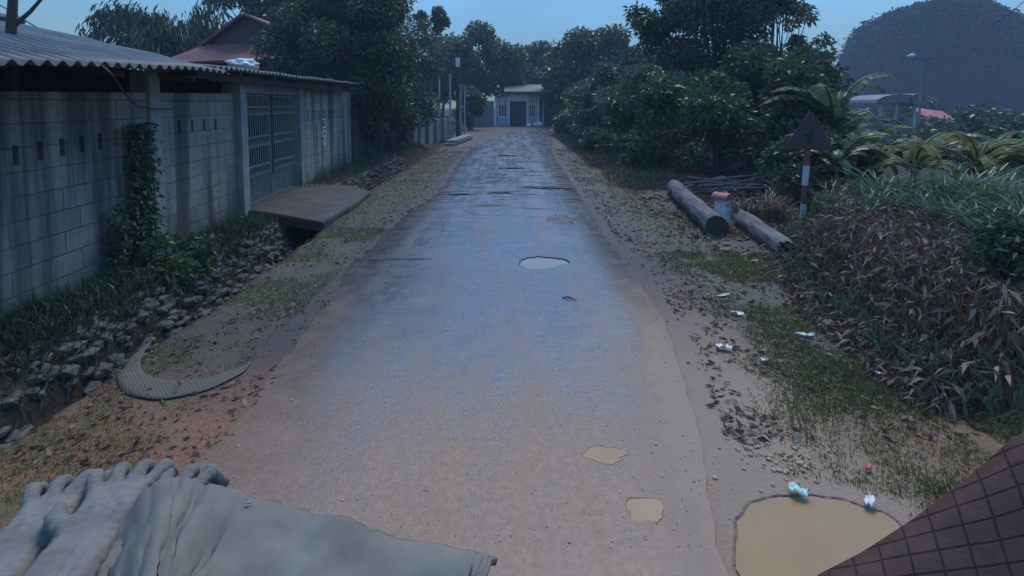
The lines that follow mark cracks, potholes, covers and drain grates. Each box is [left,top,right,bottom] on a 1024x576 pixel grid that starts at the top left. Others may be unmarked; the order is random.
pothole [625,497,665,522]
pothole [581,445,628,465]
pothole [519,256,570,269]
pothole [731,493,903,576]
pothole [546,213,576,225]
